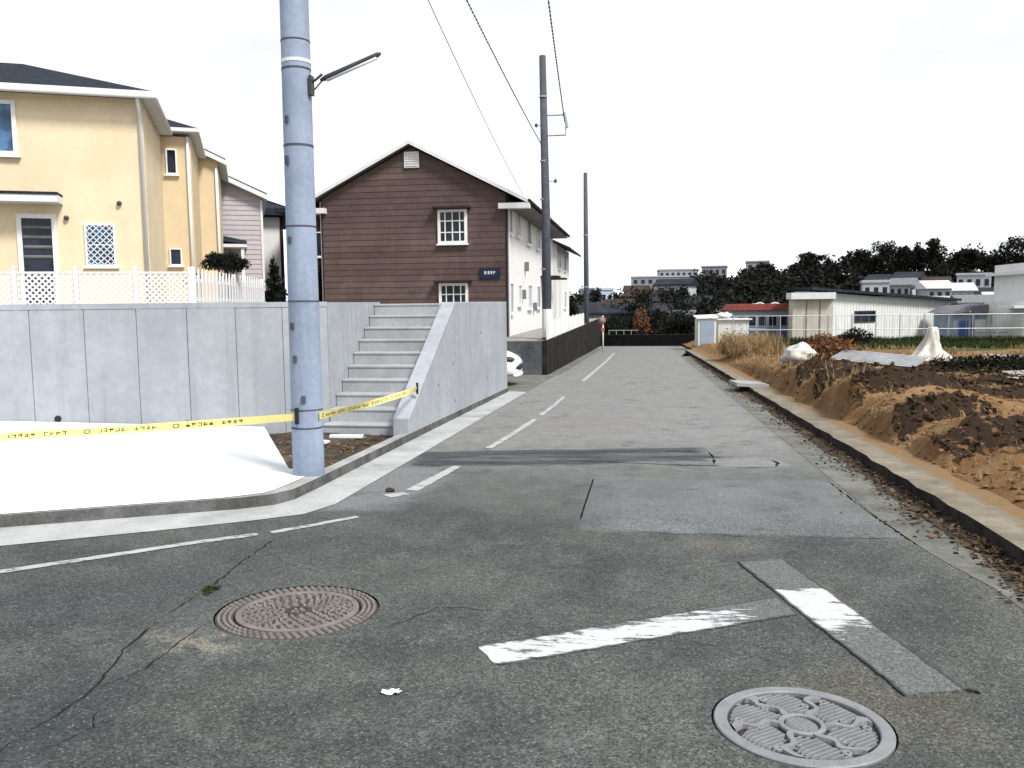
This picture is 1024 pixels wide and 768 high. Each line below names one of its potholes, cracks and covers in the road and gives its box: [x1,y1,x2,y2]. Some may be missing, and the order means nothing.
crack [374,607,490,635]
crack [0,538,276,752]
manhole cover [214,586,379,640]
manhole cover [711,687,899,768]
